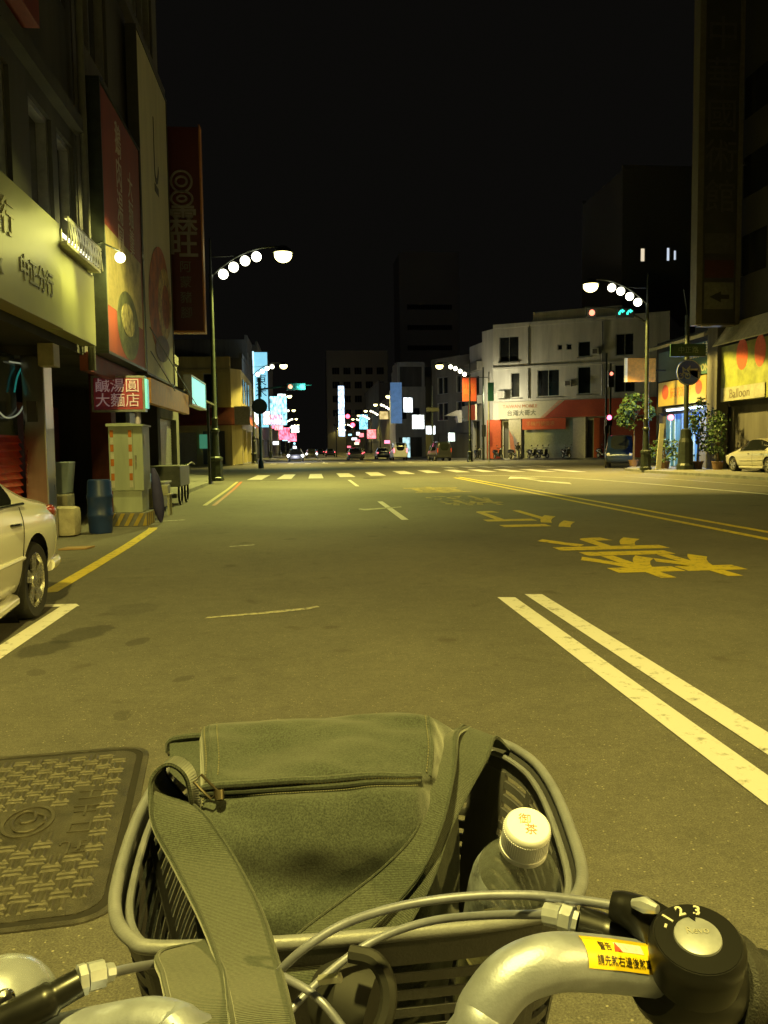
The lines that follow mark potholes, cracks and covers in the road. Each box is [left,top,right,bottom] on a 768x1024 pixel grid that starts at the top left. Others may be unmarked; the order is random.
manhole cover [0,747,149,935]
